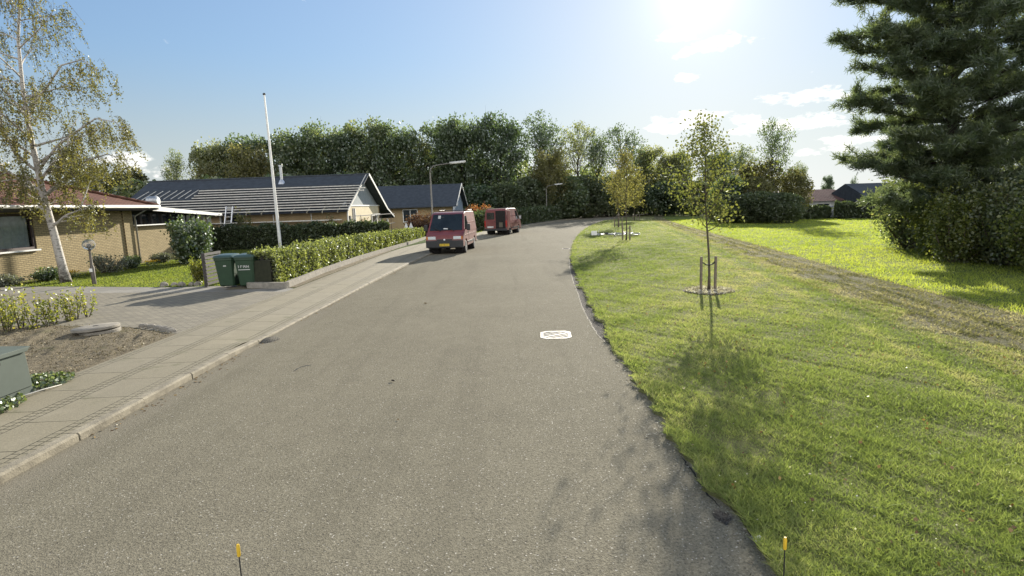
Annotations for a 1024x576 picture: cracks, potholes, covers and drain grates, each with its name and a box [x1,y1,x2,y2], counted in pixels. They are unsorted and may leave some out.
manhole cover [70,322,122,336]
pothole [712,509,733,525]
